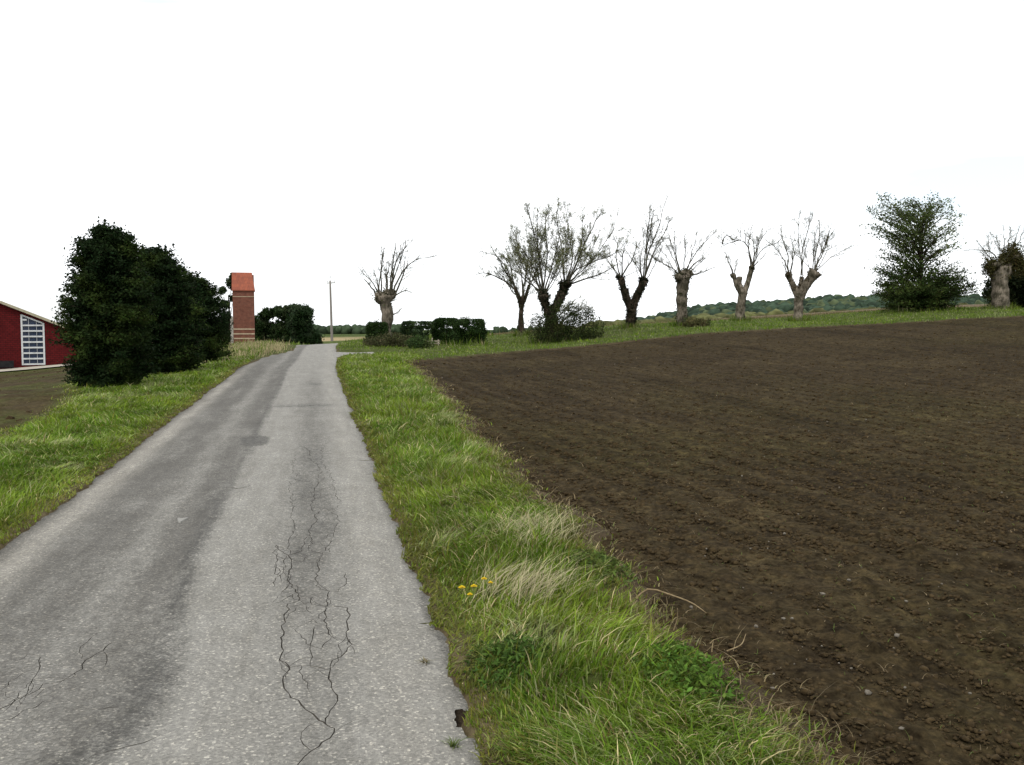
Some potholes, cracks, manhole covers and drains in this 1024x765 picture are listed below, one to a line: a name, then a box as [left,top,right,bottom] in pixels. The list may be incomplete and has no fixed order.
crack [0,634,112,721]
crack [261,445,356,765]
pothole [454,709,468,738]
